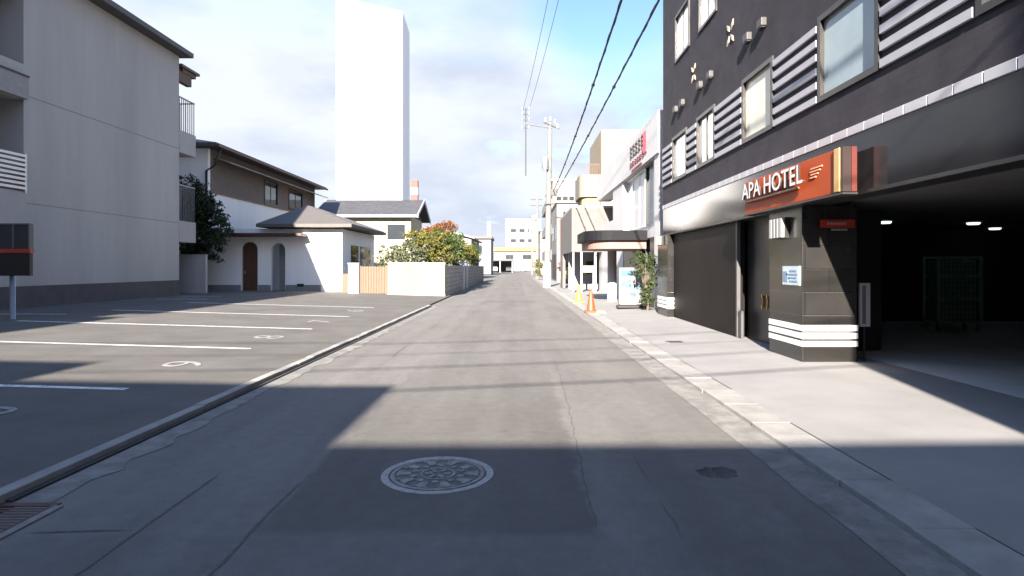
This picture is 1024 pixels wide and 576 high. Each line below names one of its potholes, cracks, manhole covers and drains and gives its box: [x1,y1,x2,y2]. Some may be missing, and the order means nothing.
crack [663,505,682,539]
crack [553,358,597,529]
manhole cover [381,456,494,494]
drain grate [0,503,62,534]
crack [31,473,301,576]
